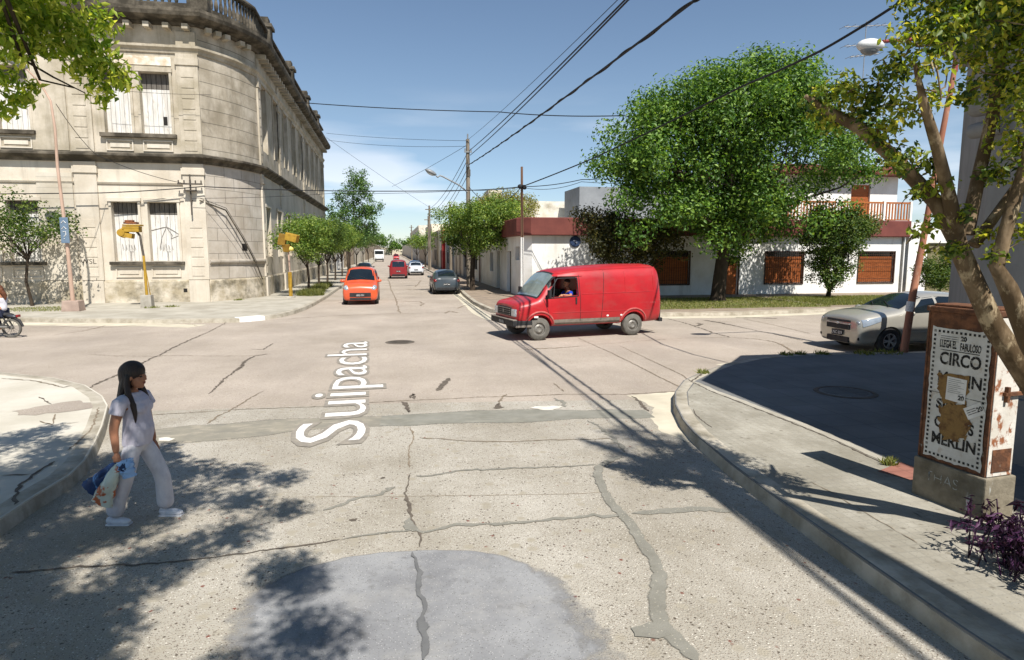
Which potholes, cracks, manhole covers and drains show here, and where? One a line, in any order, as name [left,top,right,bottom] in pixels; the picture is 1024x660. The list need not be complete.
crack [89,324,273,423]
manhole cover [813,386,879,399]
crack [10,420,625,659]
